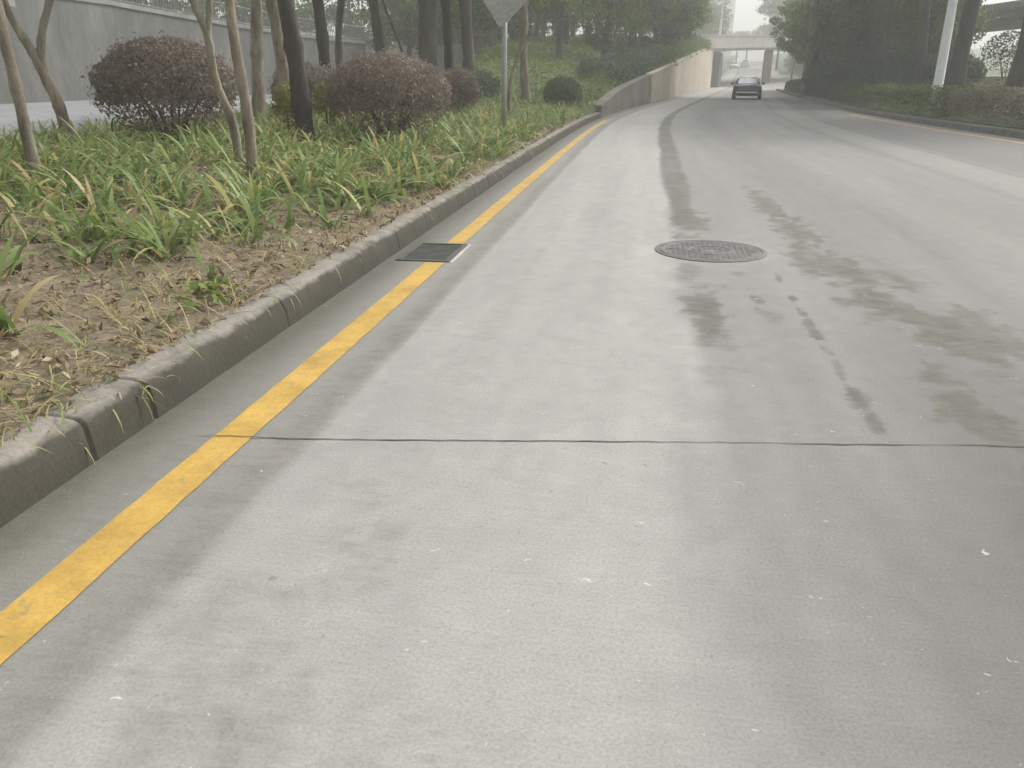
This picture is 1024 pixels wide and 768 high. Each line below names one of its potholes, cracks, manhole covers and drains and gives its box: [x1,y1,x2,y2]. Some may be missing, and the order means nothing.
drain grate [395,242,471,263]
manhole cover [655,240,767,263]
